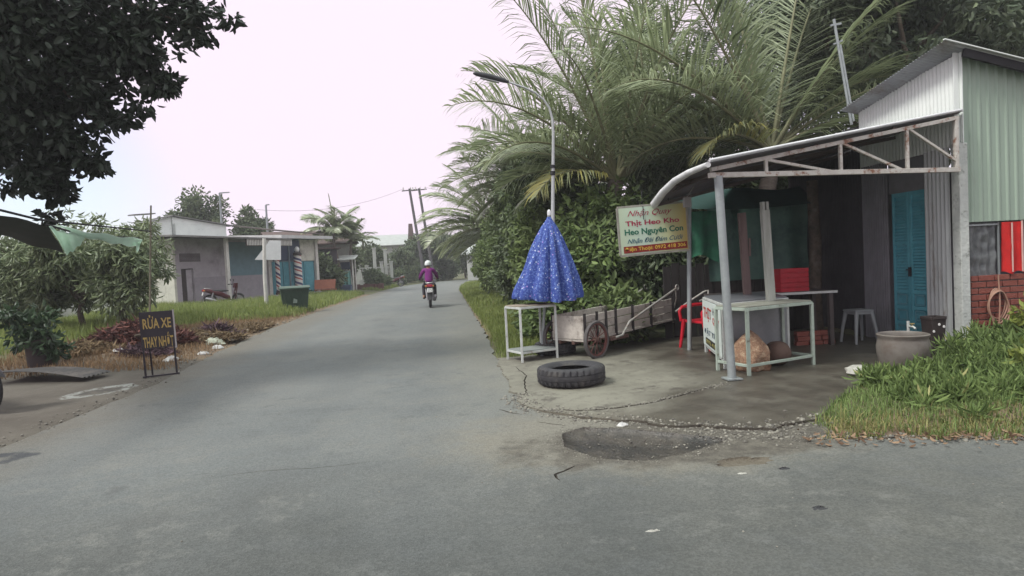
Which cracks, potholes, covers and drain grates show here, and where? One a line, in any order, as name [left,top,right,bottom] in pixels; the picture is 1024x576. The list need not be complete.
crack [540,386,716,426]
crack [499,367,528,415]
